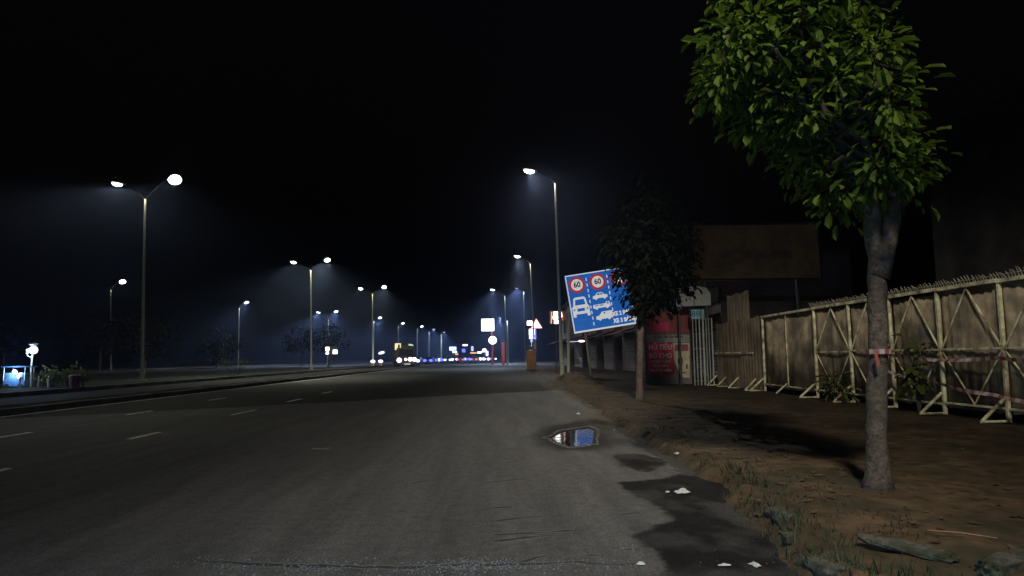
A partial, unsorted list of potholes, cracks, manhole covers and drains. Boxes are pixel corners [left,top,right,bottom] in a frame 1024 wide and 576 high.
pothole [541,425,600,448]
